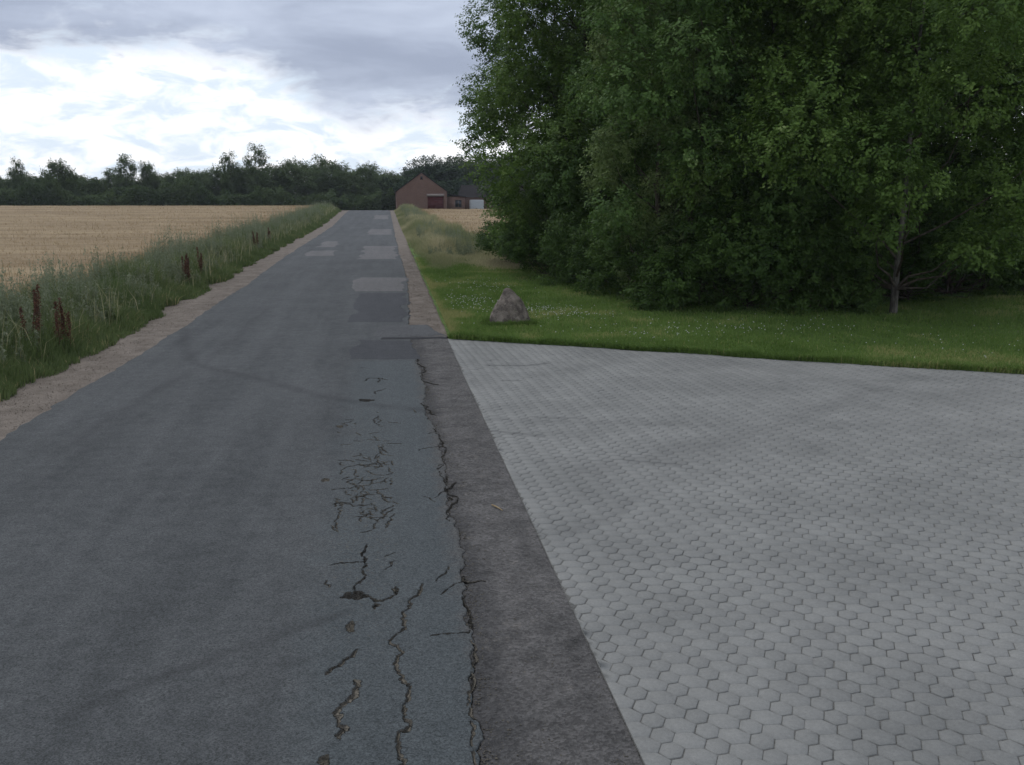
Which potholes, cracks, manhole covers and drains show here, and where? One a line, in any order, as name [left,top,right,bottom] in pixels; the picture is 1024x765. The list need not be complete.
crack [324,544,486,765]
crack [331,409,417,533]
crack [419,403,459,521]
